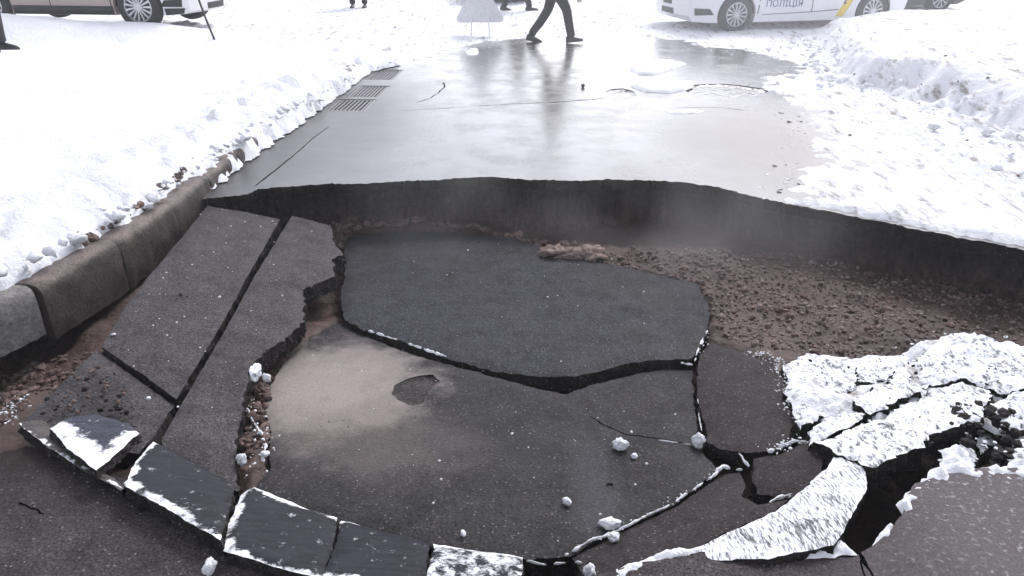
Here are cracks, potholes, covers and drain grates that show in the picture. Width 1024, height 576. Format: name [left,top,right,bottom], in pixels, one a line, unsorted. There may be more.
crack [417,83,595,110]
crack [19,502,44,514]
crack [856,551,874,576]
drain grate [347,86,390,97]
drain grate [327,99,376,111]
drain grate [364,70,403,80]
pothole [392,375,439,406]
